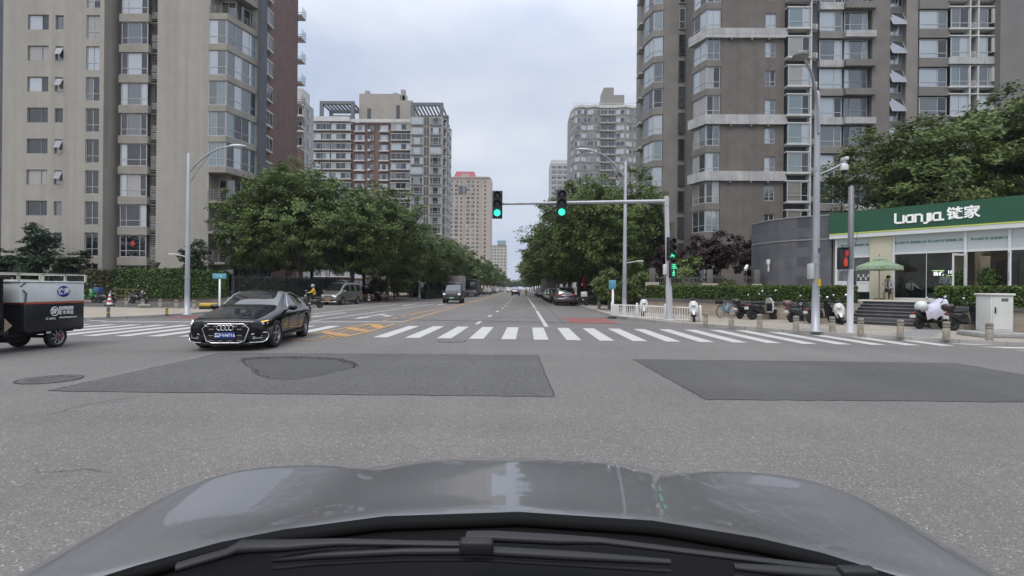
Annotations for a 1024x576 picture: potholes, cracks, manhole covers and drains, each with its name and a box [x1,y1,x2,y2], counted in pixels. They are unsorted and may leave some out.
manhole cover [13,375,84,384]
